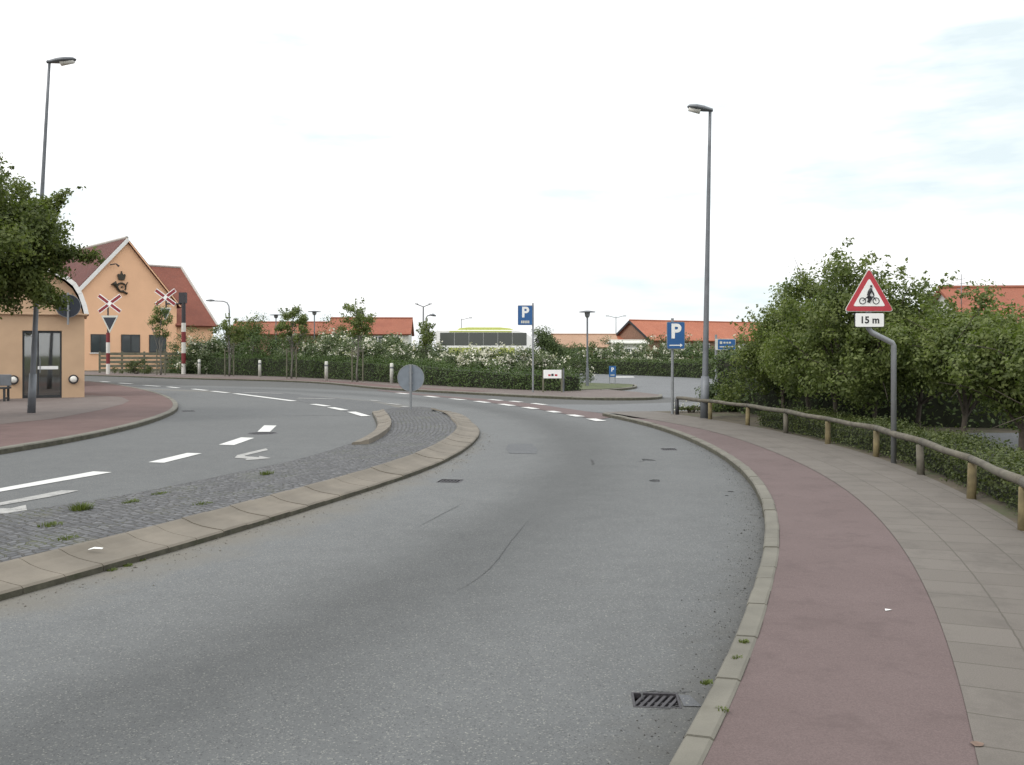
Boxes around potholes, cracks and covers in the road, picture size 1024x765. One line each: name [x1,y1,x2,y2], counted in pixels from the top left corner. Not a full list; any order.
drain grate [631,692,682,709]
